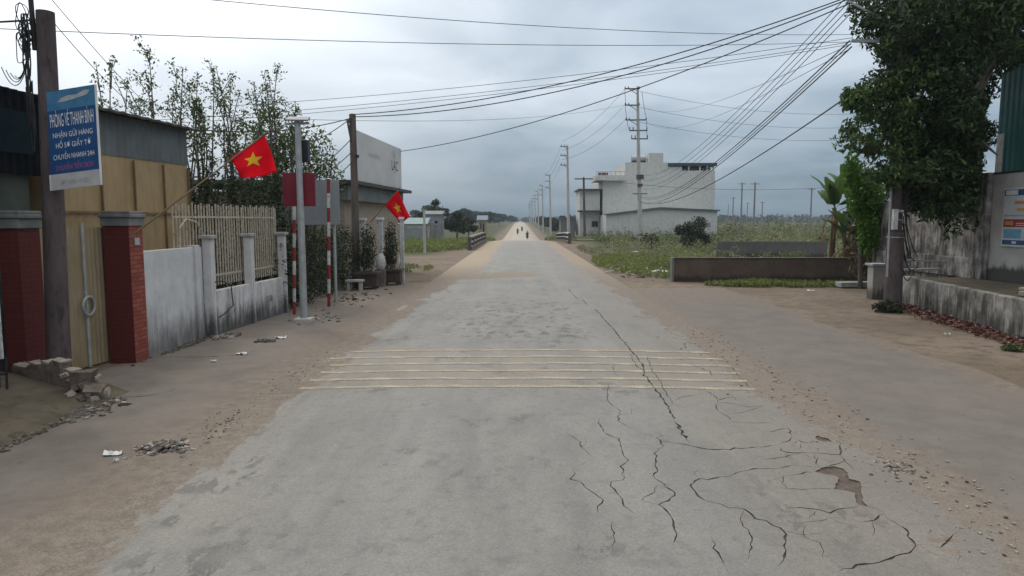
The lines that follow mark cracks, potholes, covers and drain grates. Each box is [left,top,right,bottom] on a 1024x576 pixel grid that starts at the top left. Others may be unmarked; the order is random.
pothole [815,466,868,506]
crack [568,289,961,572]
